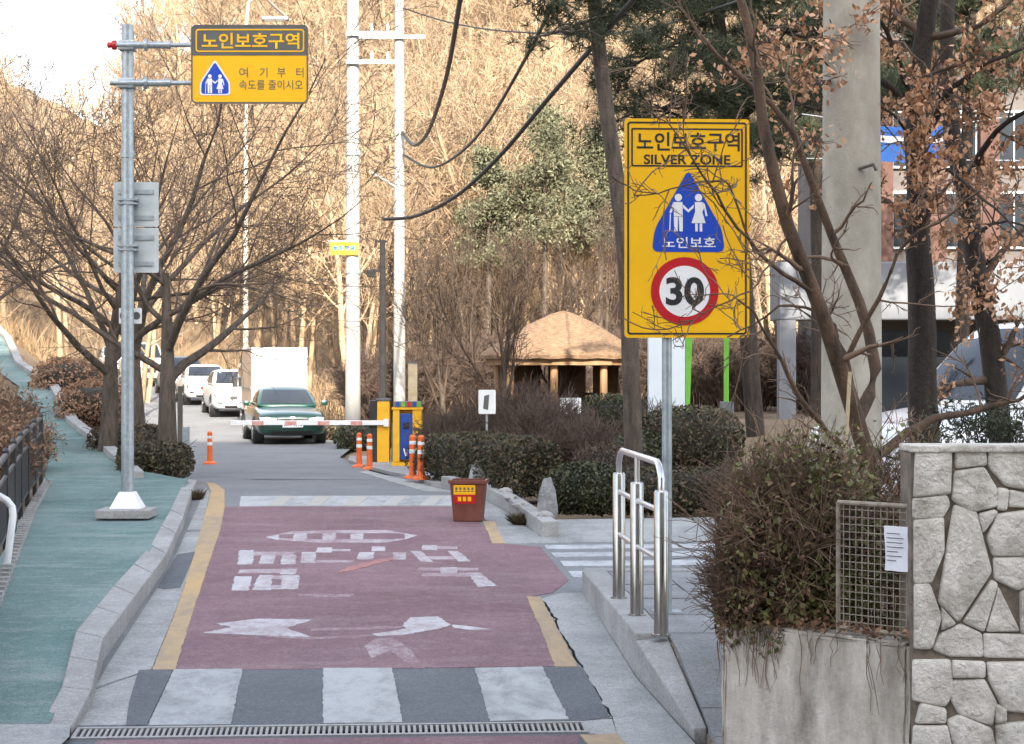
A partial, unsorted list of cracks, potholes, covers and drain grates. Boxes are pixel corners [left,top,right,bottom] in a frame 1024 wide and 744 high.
drain grate [70,721,589,740]
